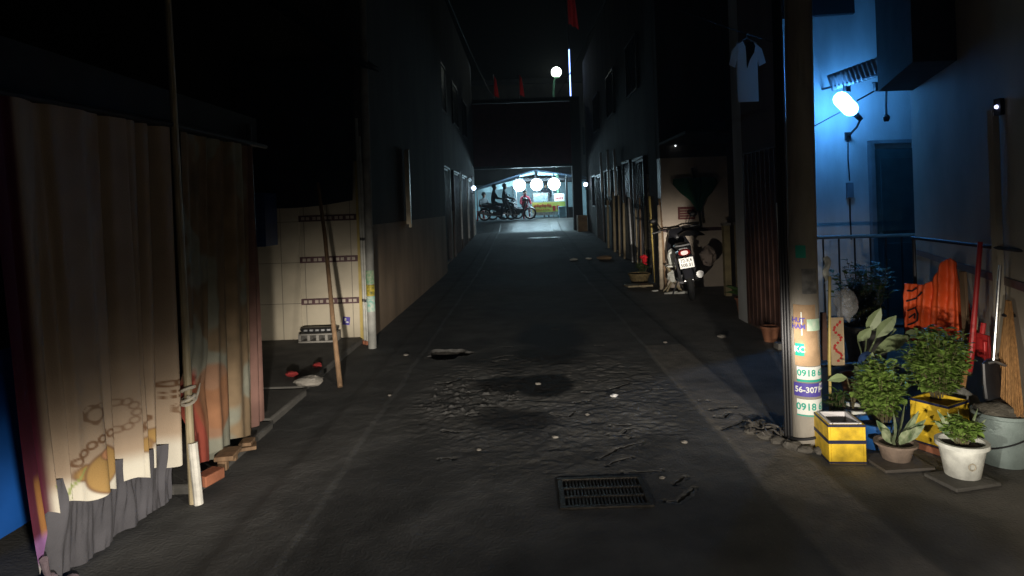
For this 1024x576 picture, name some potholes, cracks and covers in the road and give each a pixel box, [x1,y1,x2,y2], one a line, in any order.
crack [551,372,634,419]
drain grate [557,475,655,510]
crack [594,424,697,504]
crack [437,378,482,434]
